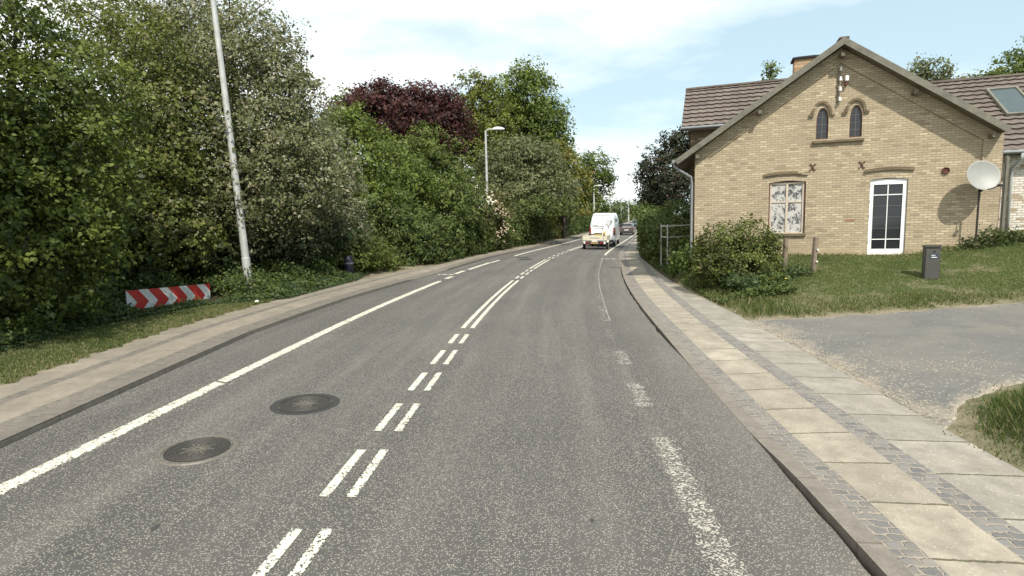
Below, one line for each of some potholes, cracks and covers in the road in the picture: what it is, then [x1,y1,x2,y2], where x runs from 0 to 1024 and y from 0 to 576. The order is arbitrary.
manhole cover [153,435,240,466]
manhole cover [270,394,340,415]
